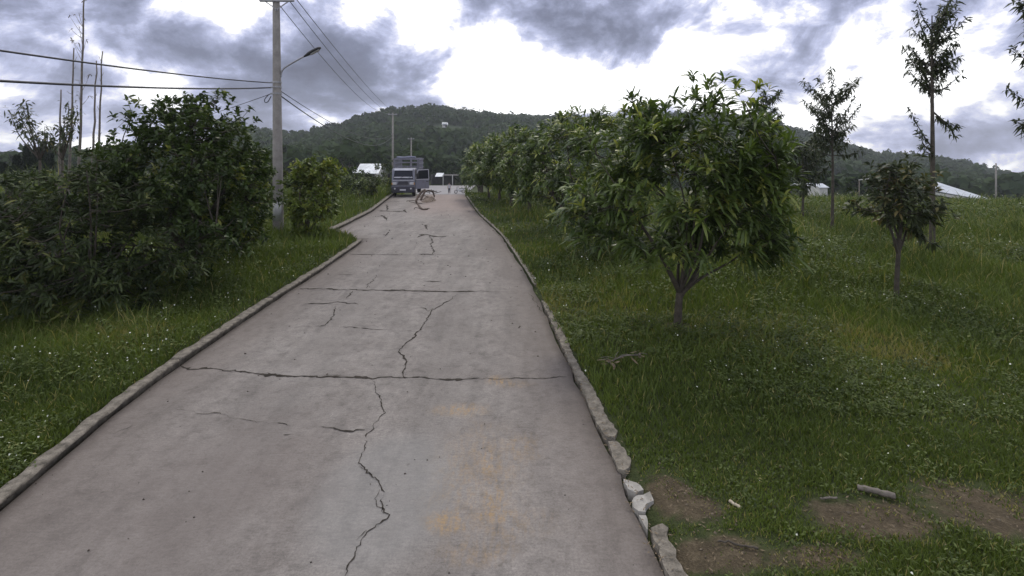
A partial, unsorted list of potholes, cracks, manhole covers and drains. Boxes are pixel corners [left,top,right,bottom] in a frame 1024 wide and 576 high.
crack [181,274,563,575]
crack [377,205,446,254]
